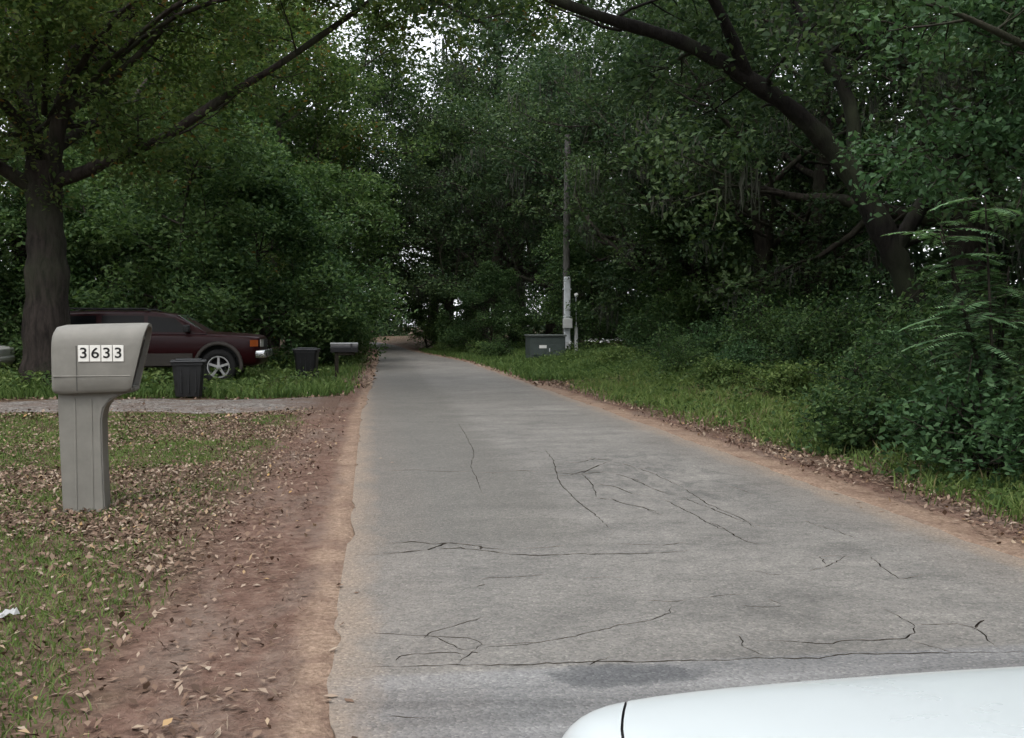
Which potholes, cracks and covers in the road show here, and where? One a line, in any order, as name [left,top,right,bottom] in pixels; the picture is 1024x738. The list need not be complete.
crack [545,450,752,543]
crack [377,600,995,667]
crack [390,541,687,556]
